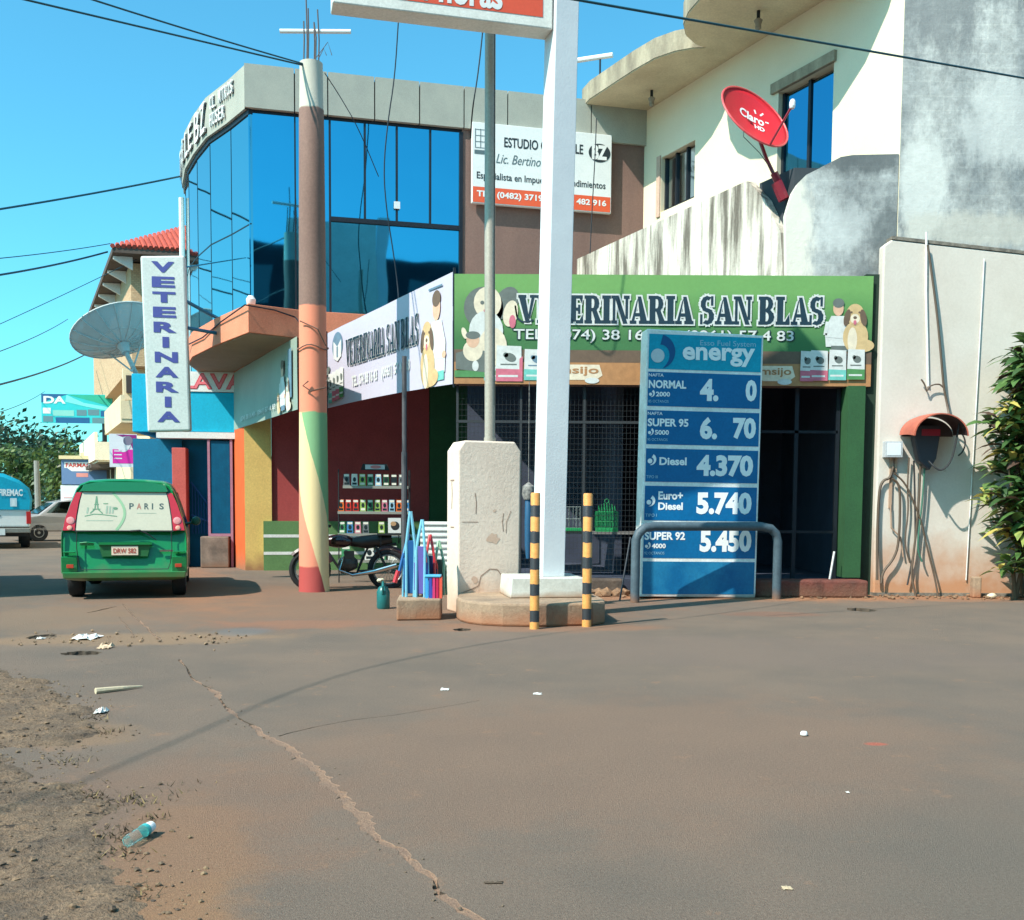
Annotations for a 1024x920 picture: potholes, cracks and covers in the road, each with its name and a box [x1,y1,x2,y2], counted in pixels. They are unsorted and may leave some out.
crack [178,660,504,920]
